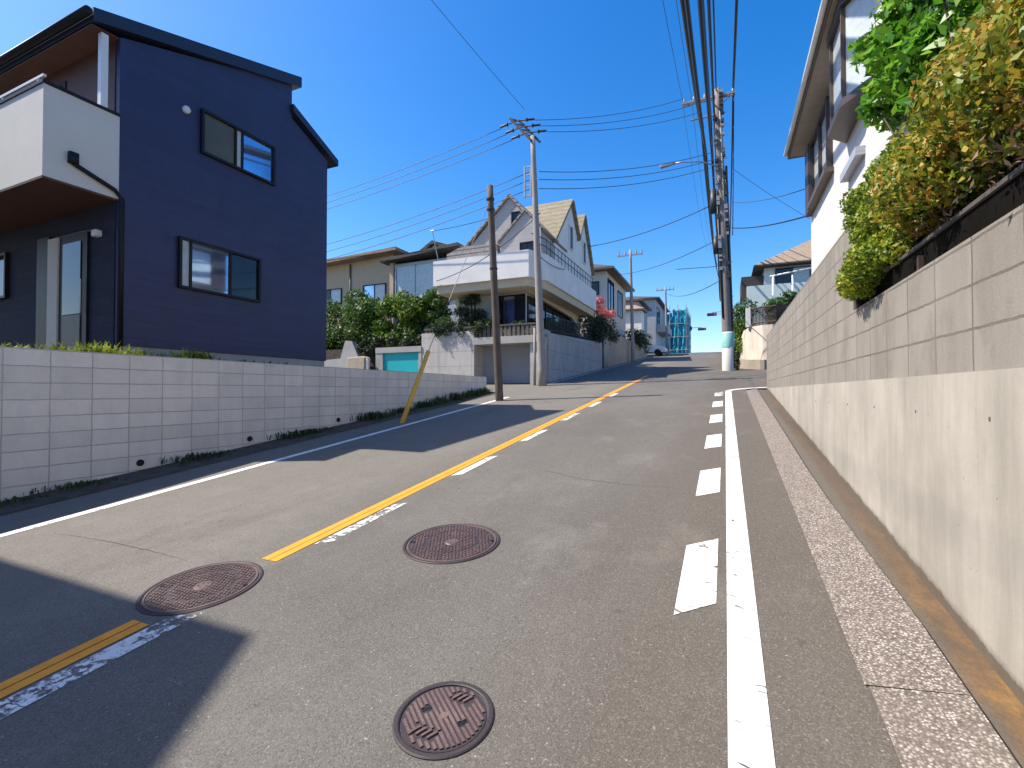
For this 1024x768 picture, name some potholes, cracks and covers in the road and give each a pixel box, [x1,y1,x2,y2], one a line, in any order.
manhole cover [403,524,500,564]
manhole cover [135,561,263,616]
manhole cover [392,681,494,761]
